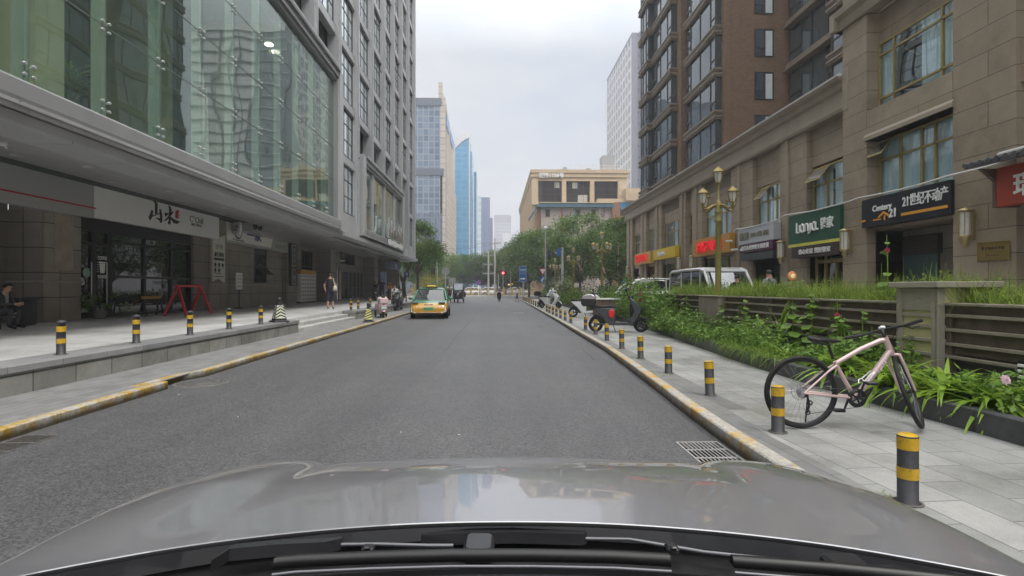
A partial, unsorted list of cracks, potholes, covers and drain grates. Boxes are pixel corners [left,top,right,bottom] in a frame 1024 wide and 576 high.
drain grate [676,441,745,463]
manhole cover [171,378,230,388]
